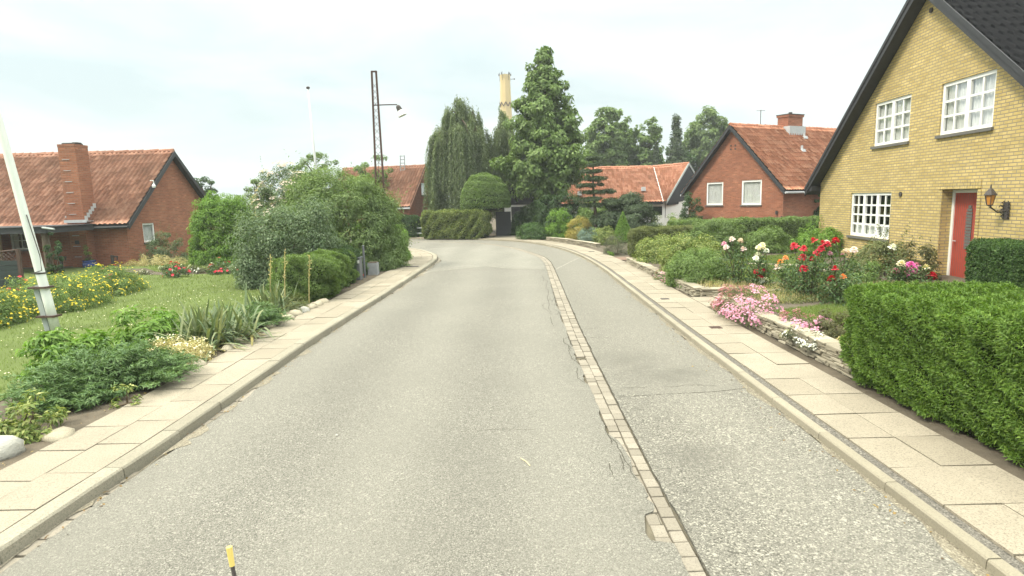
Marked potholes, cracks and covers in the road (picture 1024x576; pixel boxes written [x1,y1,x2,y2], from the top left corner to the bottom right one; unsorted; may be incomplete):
crack [542,270,742,576]
pothole [640,510,667,542]
